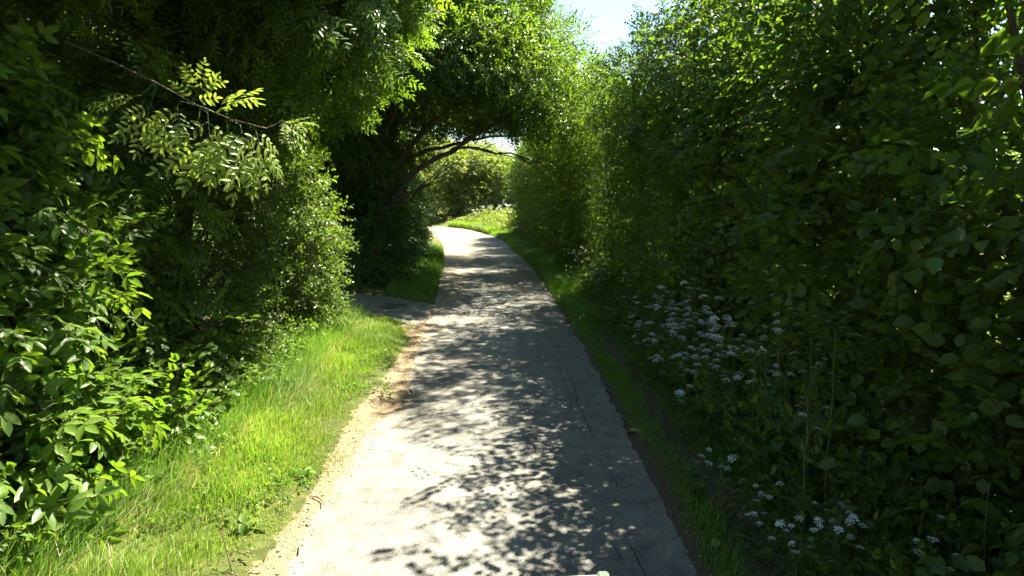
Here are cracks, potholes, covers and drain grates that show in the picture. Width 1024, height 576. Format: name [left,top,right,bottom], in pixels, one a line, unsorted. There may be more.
crack [601,513,646,576]
crack [558,365,595,438]
